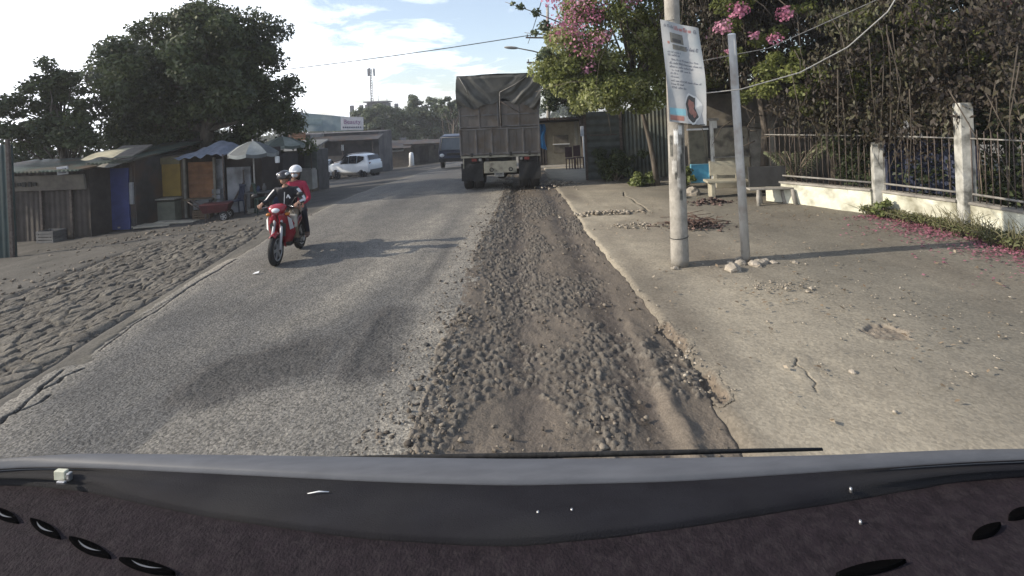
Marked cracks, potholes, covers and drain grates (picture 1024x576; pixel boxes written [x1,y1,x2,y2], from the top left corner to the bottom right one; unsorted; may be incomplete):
pothole [850,319,934,347]
pothole [699,369,734,408]
crack [619,192,654,212]
crack [775,351,834,400]
pothole [658,320,695,357]
